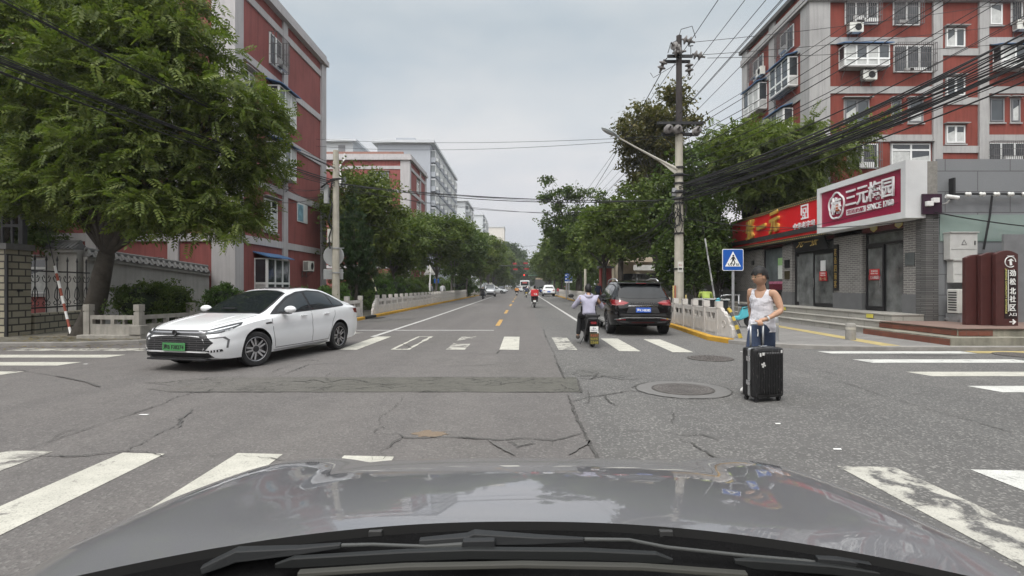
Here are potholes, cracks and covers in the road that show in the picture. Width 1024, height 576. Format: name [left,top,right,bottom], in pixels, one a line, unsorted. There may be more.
crack [3,343,721,468]
manhole cover [635,381,733,399]
